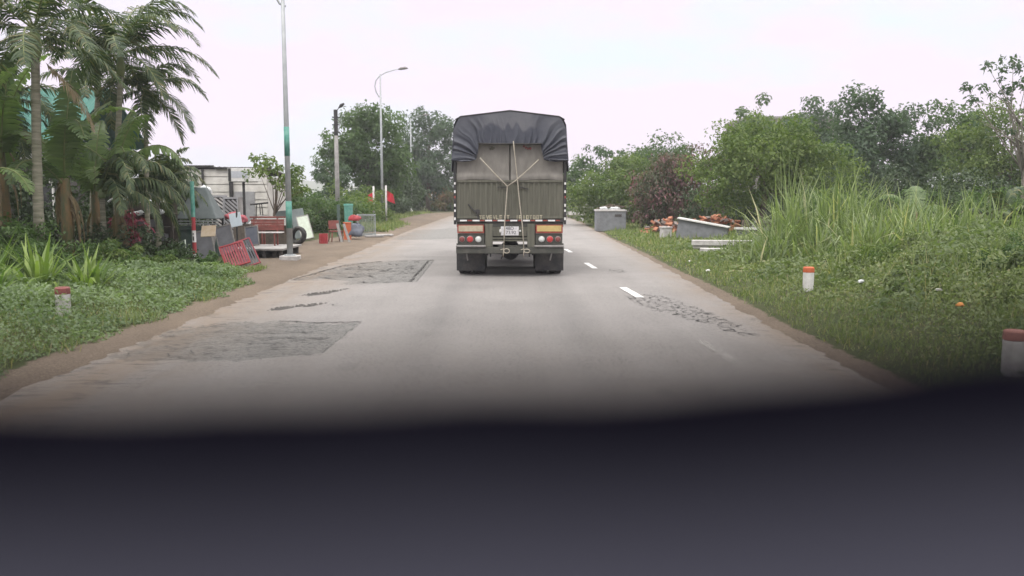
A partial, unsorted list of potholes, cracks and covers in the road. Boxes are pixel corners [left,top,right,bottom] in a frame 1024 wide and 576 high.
crack [627,294,739,331]
